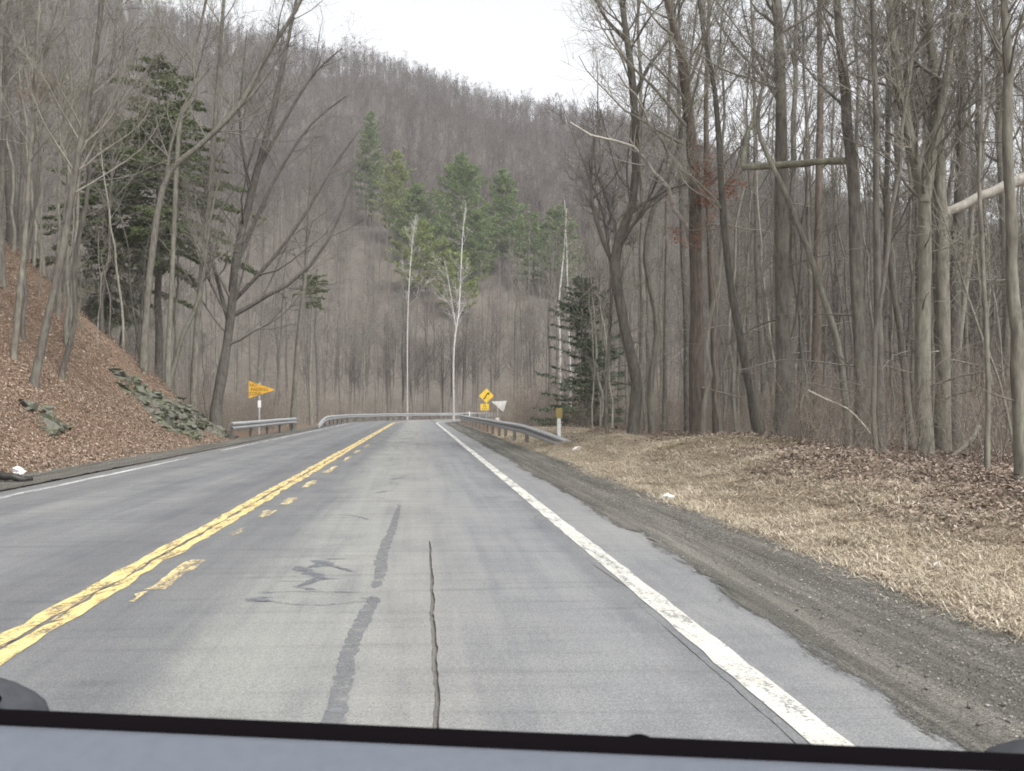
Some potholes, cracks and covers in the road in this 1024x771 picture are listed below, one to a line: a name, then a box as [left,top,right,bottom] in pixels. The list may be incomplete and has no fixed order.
crack [429,541,441,728]
